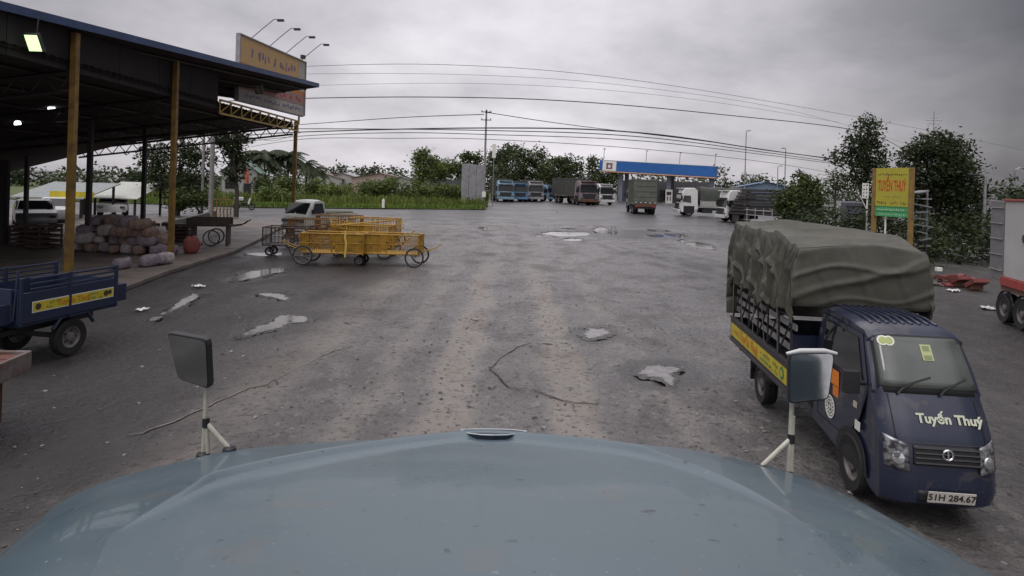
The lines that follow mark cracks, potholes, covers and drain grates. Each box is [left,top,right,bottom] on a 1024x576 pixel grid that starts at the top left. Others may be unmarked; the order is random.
pothole [591,226,610,234]
crack [126,346,351,436]
pothole [682,242,718,250]
crack [489,342,598,405]
